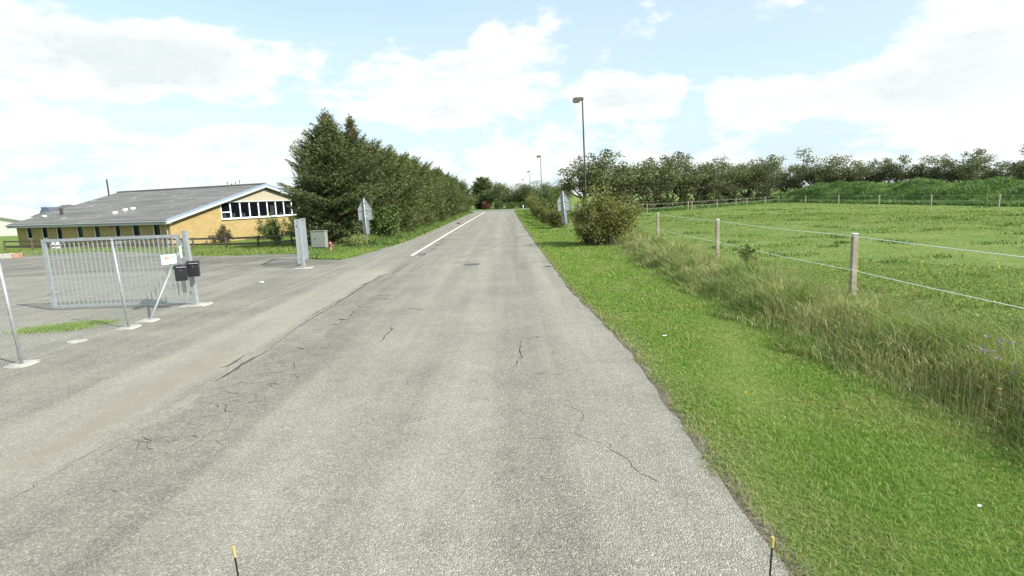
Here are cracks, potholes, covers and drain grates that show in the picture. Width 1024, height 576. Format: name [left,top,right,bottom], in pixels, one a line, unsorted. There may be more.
crack [6,295,385,502]
crack [571,407,656,481]
